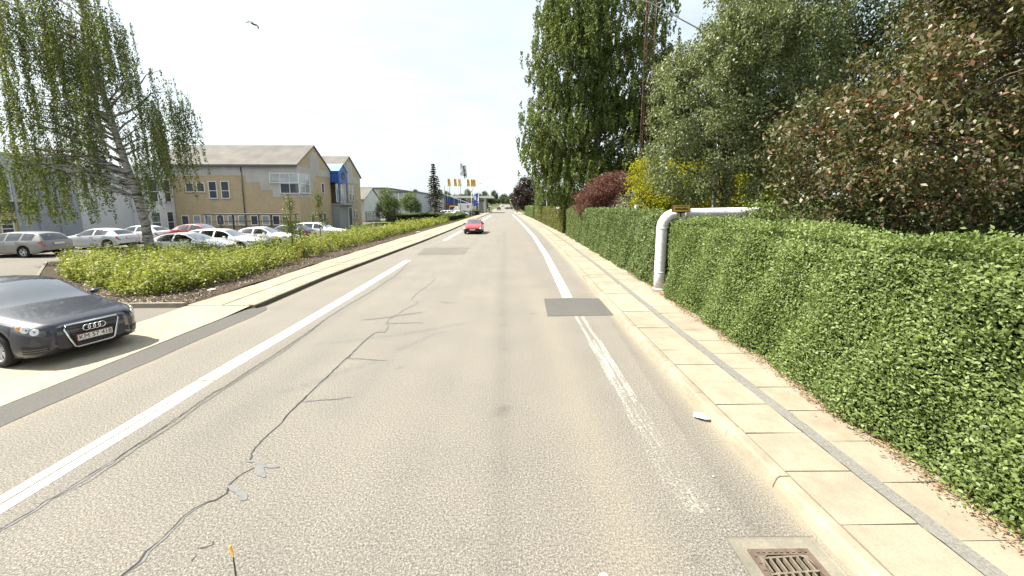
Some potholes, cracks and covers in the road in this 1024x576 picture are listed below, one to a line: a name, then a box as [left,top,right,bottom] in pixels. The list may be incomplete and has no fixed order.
drain grate [725,536,848,576]
crack [121,274,435,576]
